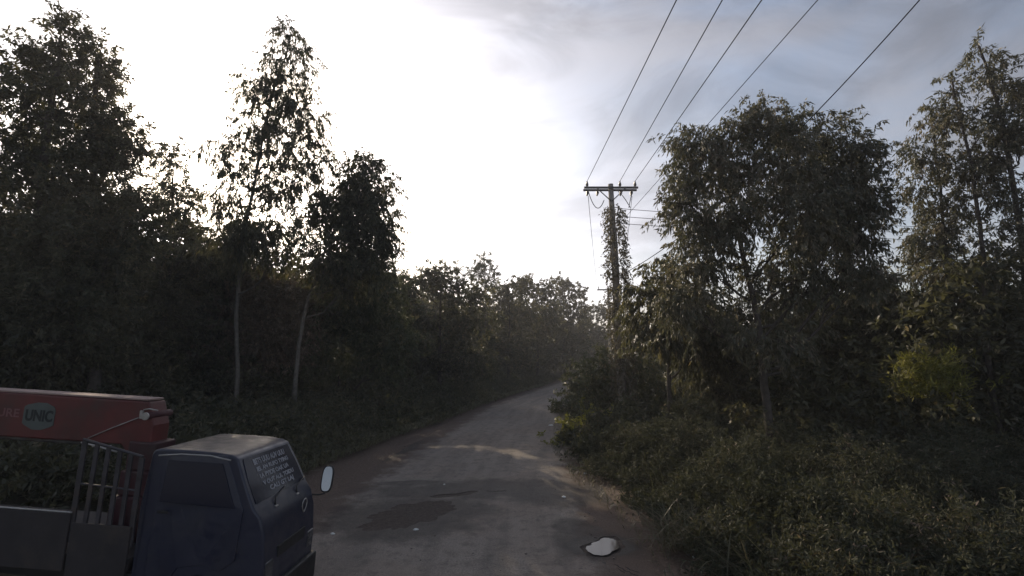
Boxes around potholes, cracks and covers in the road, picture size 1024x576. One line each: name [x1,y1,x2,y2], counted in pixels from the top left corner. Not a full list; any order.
pothole [580,536,625,557]
